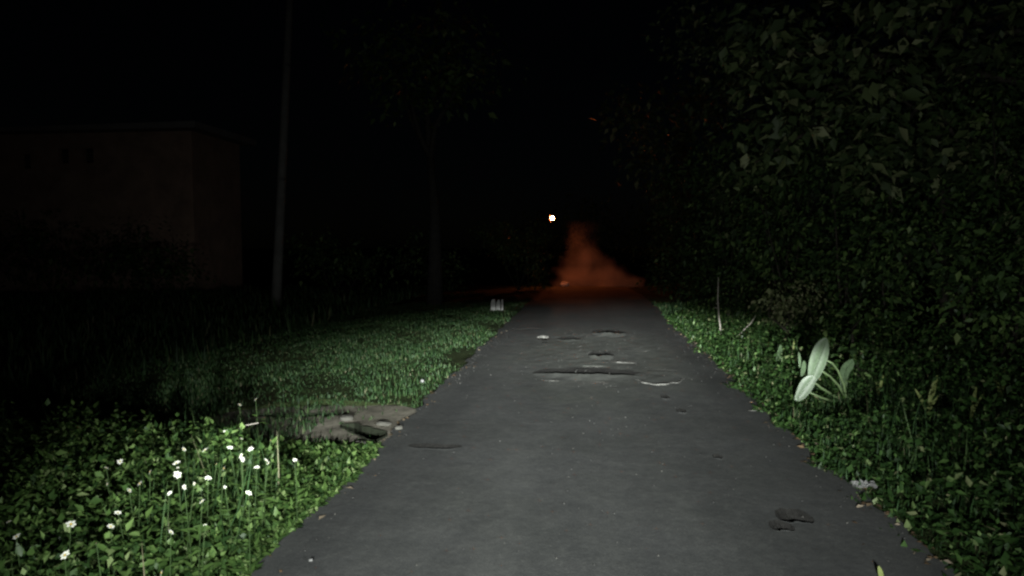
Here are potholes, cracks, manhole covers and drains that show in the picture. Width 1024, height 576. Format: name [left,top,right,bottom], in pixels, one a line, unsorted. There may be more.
pothole [532,367,648,381]
pothole [635,372,685,385]
pothole [775,508,815,524]
pothole [768,519,796,532]
pothole [588,351,614,361]
pothole [592,329,627,337]
